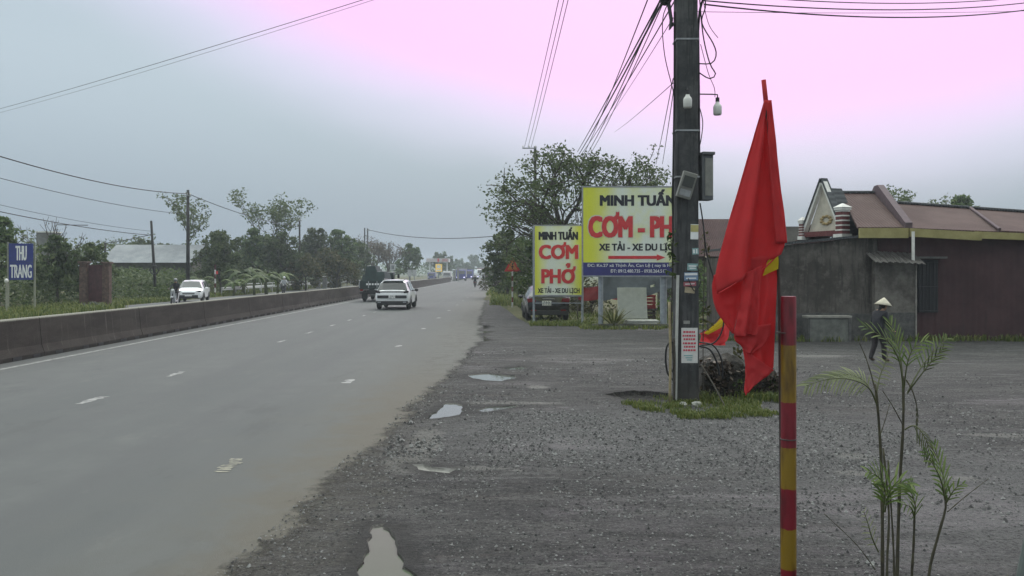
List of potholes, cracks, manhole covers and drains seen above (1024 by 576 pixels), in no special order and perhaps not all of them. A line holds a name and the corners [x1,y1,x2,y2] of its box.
pothole [606,390,669,402]
pothole [357,523,418,576]
pothole [412,464,456,473]
